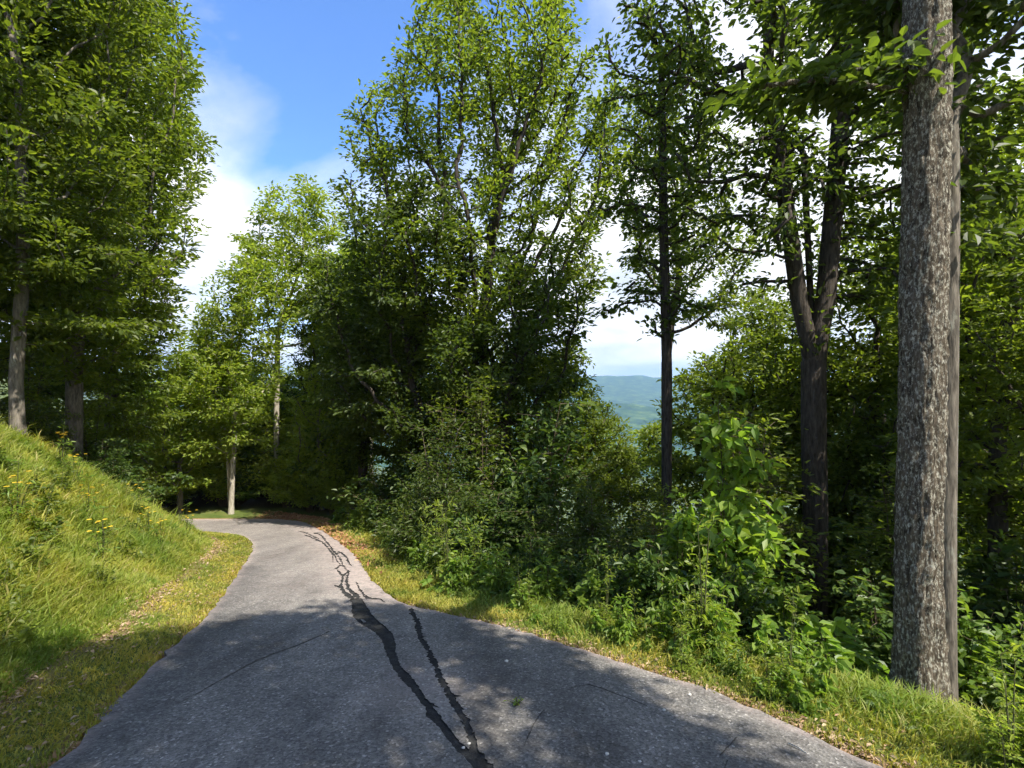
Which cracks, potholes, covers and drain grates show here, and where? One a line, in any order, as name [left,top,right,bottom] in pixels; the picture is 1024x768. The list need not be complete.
crack [574,684,647,706]
crack [179,531,494,768]
